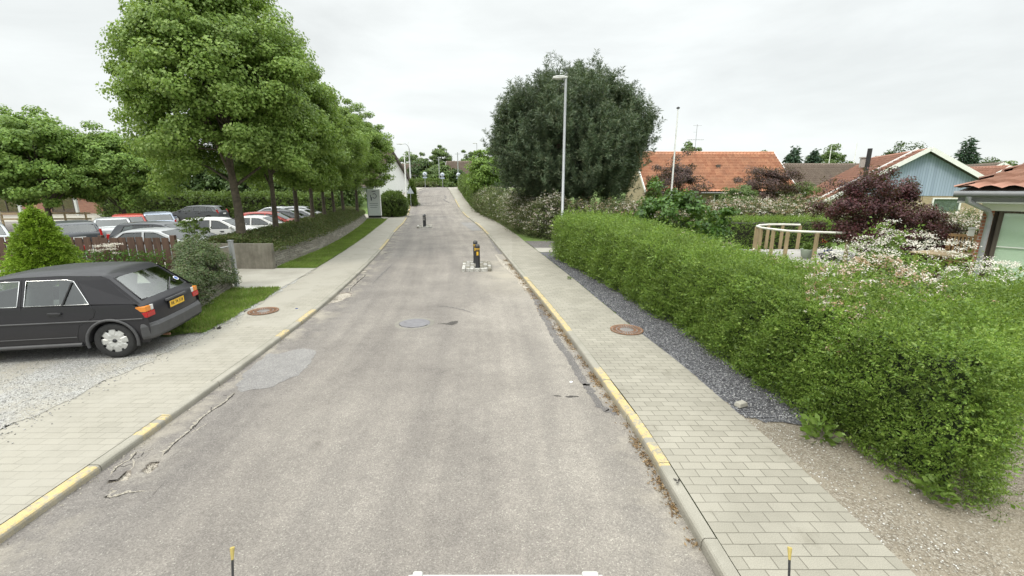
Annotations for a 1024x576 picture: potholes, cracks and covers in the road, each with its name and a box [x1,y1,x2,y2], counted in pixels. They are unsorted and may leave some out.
manhole cover [610,324,644,335]
crack [88,389,244,507]
manhole cover [394,317,435,330]
pothole [92,466,138,497]
manhole cover [247,307,279,315]
pothole [136,458,167,478]
